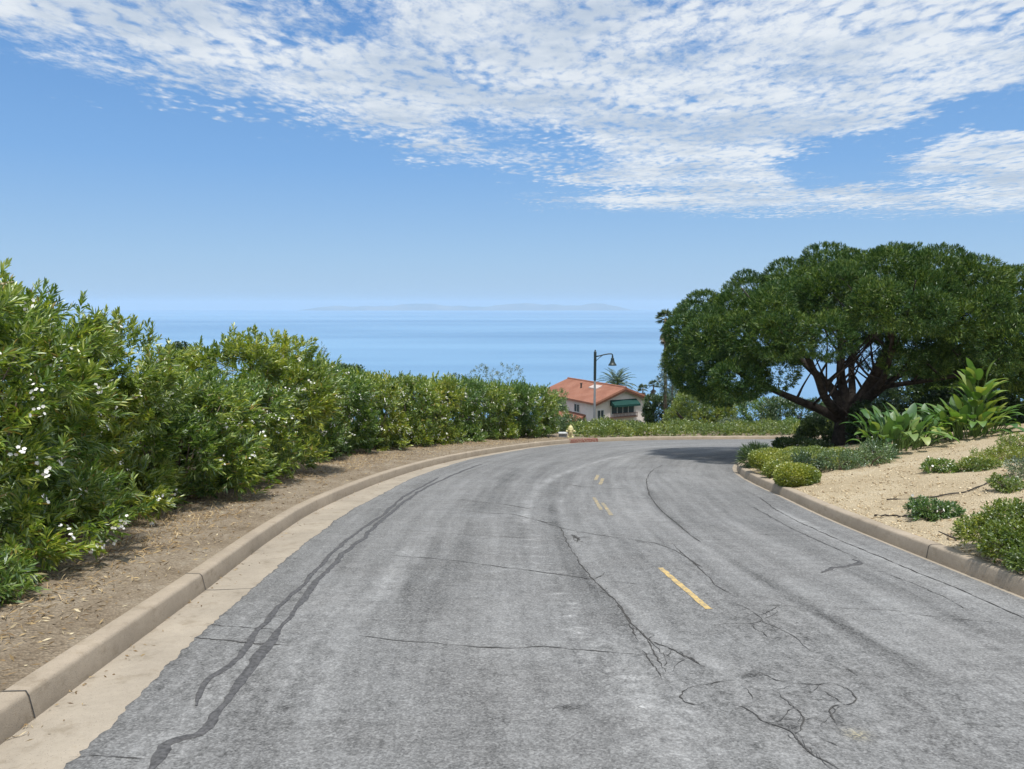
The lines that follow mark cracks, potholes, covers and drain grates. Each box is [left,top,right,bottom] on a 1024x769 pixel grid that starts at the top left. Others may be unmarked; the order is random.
crack [360,499,811,704]
crack [733,659,857,769]
